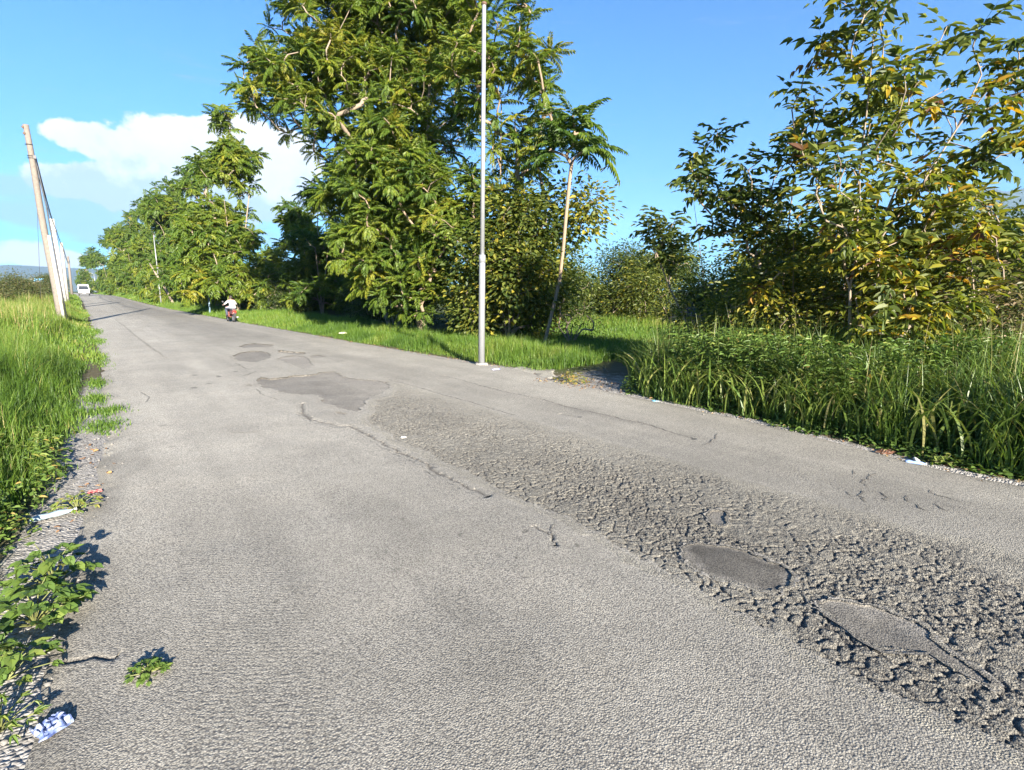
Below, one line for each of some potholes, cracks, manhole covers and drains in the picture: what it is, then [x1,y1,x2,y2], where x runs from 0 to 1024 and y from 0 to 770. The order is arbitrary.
crack [43,646,121,676]
crack [297,376,1024,767]
